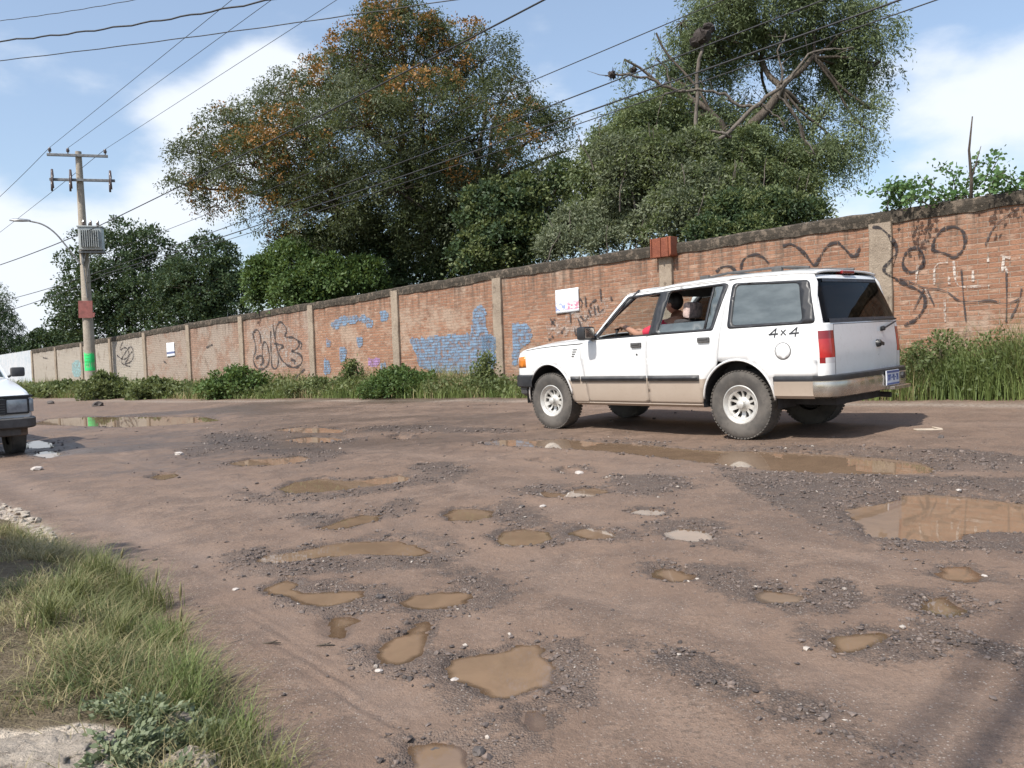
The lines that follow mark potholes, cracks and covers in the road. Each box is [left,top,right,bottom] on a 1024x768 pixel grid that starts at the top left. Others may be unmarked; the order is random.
pothole [36,415,226,428]
pothole [480,523,567,548]
pothole [434,503,507,523]
pothole [416,629,586,702]
pothole [809,620,924,663]
pothole [301,510,393,532]
pothole [466,437,953,475]
pothole [270,472,420,495]
pothole [347,609,454,673]
pothole [381,580,490,611]
pothole [897,587,992,622]
pothole [239,534,446,568]
